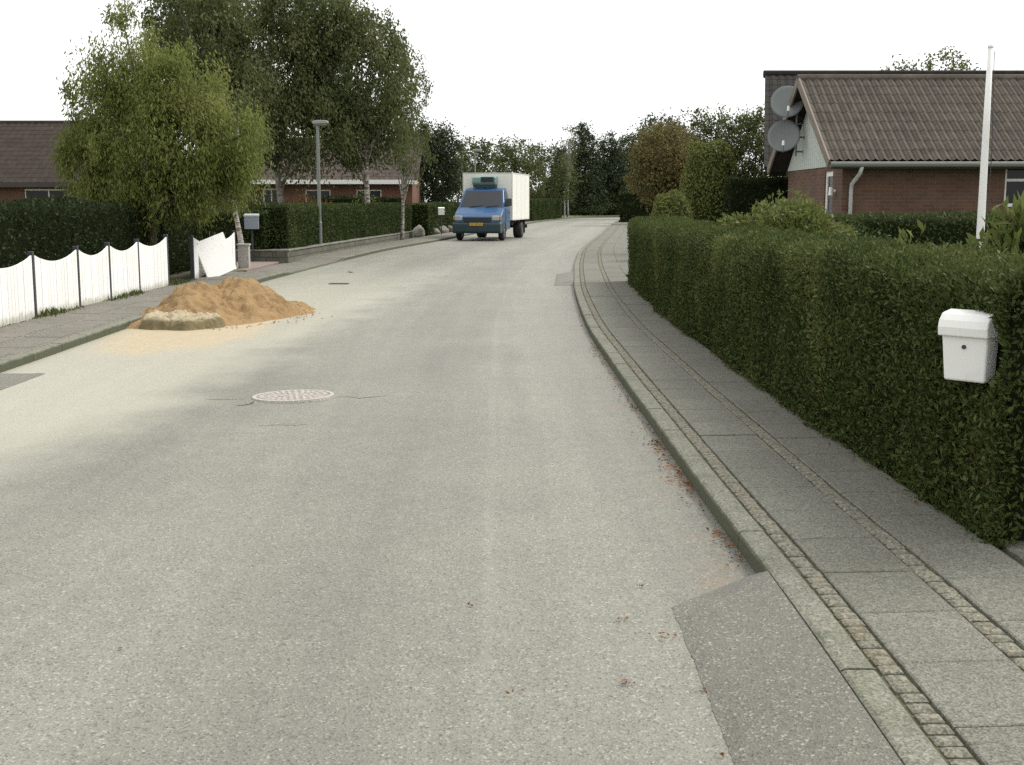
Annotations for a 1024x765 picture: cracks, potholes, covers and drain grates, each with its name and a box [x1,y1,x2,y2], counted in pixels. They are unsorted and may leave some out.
manhole cover [252,390,335,403]
